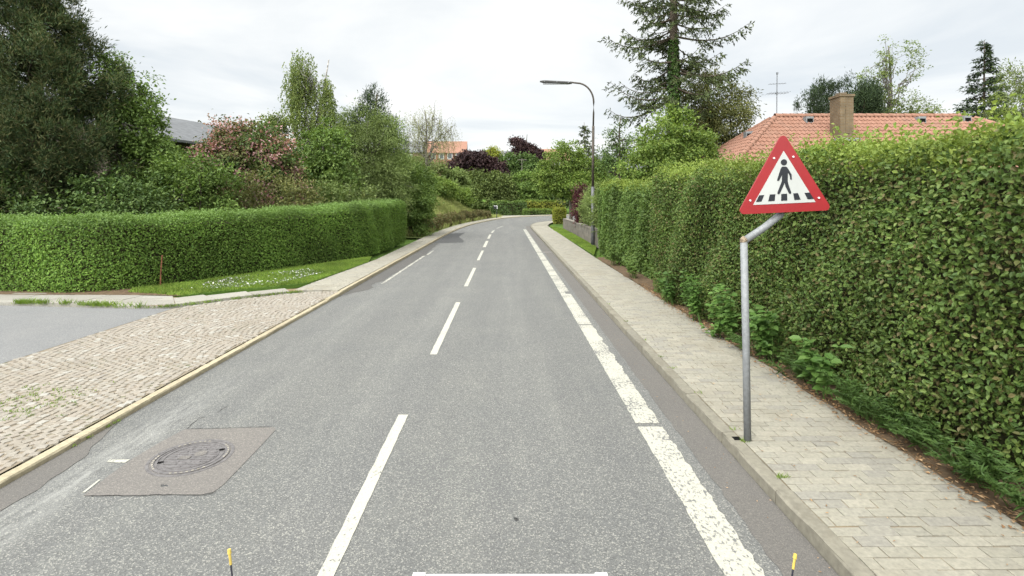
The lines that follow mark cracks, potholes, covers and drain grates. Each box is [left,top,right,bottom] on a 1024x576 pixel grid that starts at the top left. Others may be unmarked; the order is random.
manhole cover [145,439,235,477]
